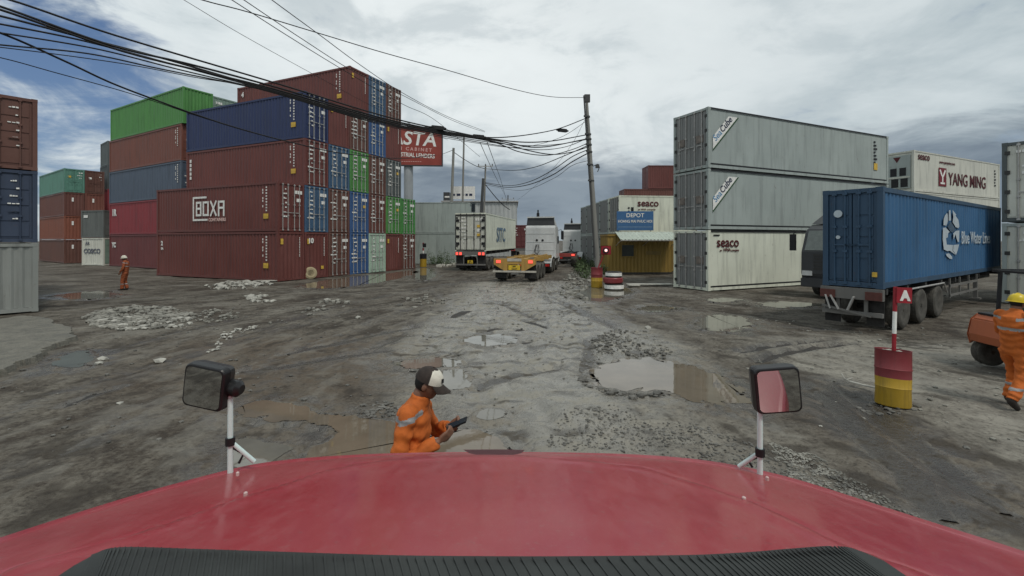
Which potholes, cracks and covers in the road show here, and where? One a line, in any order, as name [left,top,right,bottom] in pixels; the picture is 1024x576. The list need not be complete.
pothole [388,356,468,373]
pothole [458,333,522,349]
pothole [42,350,100,371]
pothole [689,314,757,334]
pothole [440,368,478,393]
pothole [754,301,825,309]
pothole [582,356,754,411]
